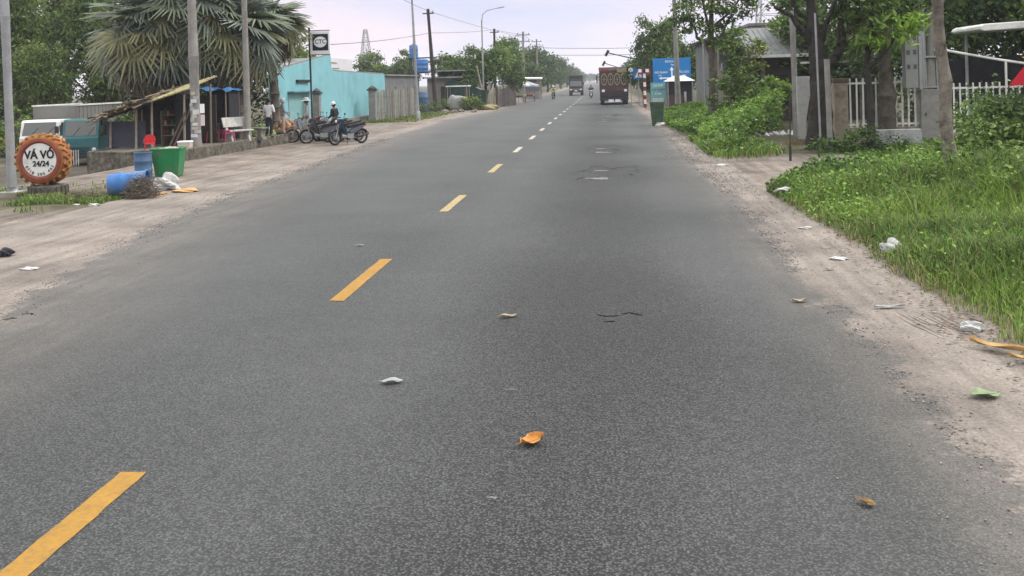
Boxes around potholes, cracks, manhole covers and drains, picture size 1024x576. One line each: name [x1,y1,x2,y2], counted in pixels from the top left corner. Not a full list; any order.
crack [597,312,643,323]
